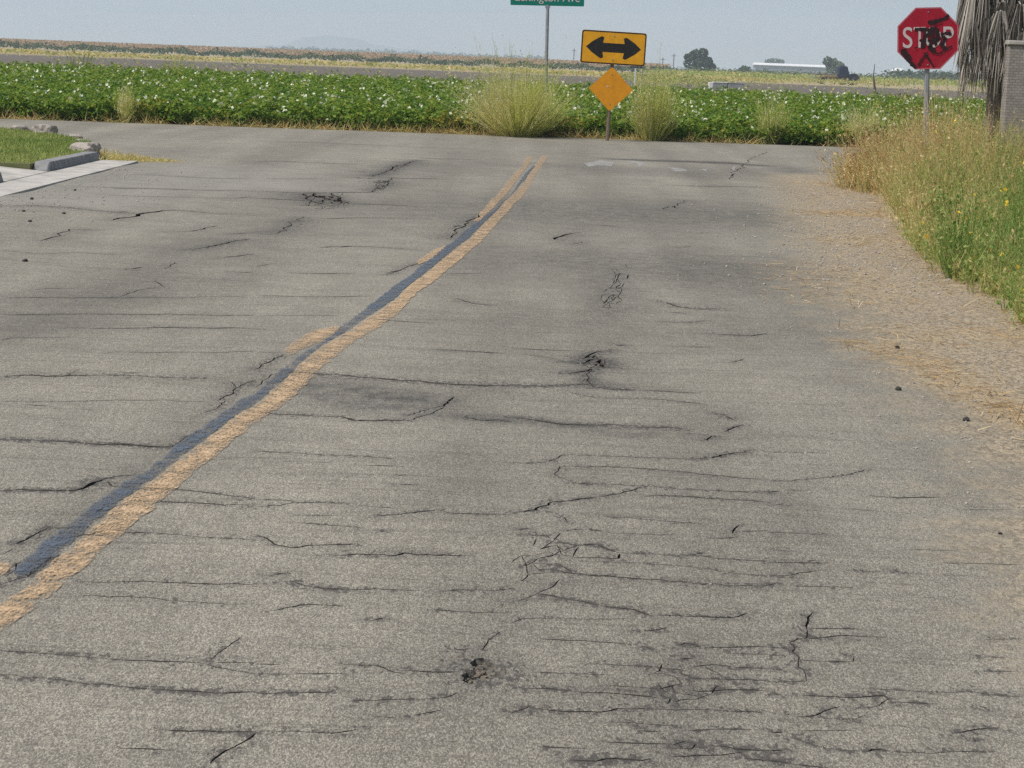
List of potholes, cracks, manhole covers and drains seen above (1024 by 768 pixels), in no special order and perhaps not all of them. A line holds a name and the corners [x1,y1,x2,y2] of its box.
pothole [461,658,507,684]
crack [4,141,502,273]
crack [266,345,1017,768]
